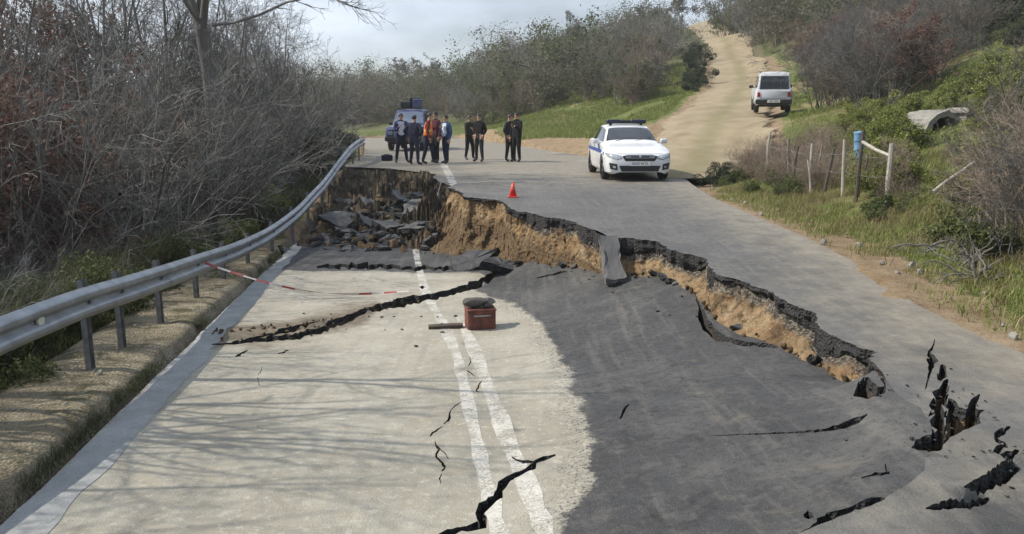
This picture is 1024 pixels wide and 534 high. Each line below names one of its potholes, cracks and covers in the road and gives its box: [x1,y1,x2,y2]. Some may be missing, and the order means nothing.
crack [212,167,886,534]
crack [911,339,1019,510]
pothole [853,377,886,399]
